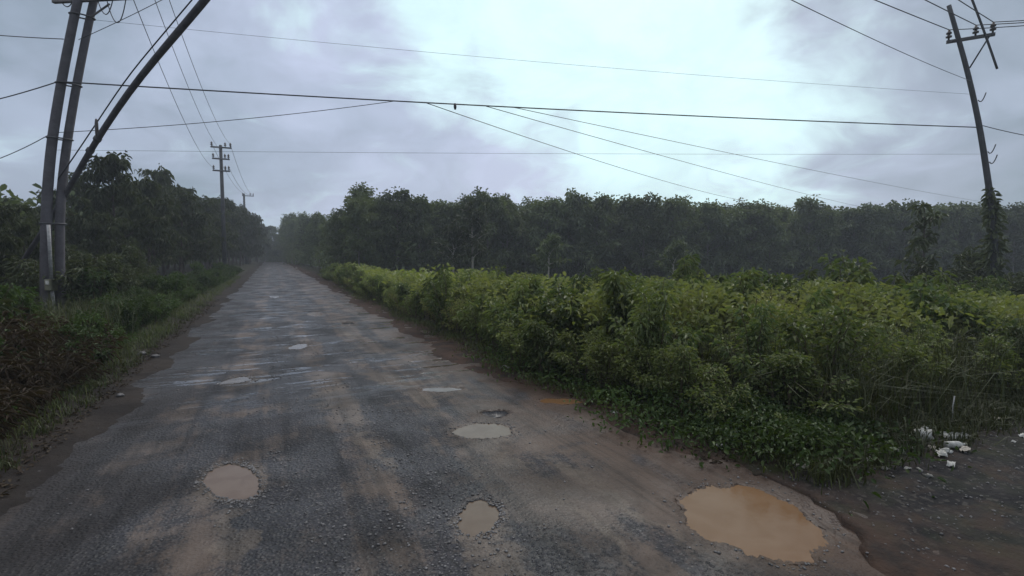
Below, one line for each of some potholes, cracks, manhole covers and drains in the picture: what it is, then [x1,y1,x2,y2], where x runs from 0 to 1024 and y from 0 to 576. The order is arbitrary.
pothole [212,375,258,386]
pothole [675,481,841,566]
pothole [535,396,587,405]
pothole [476,408,516,418]
pothole [446,421,518,440]
pothole [198,462,268,502]
pothole [448,495,510,542]
